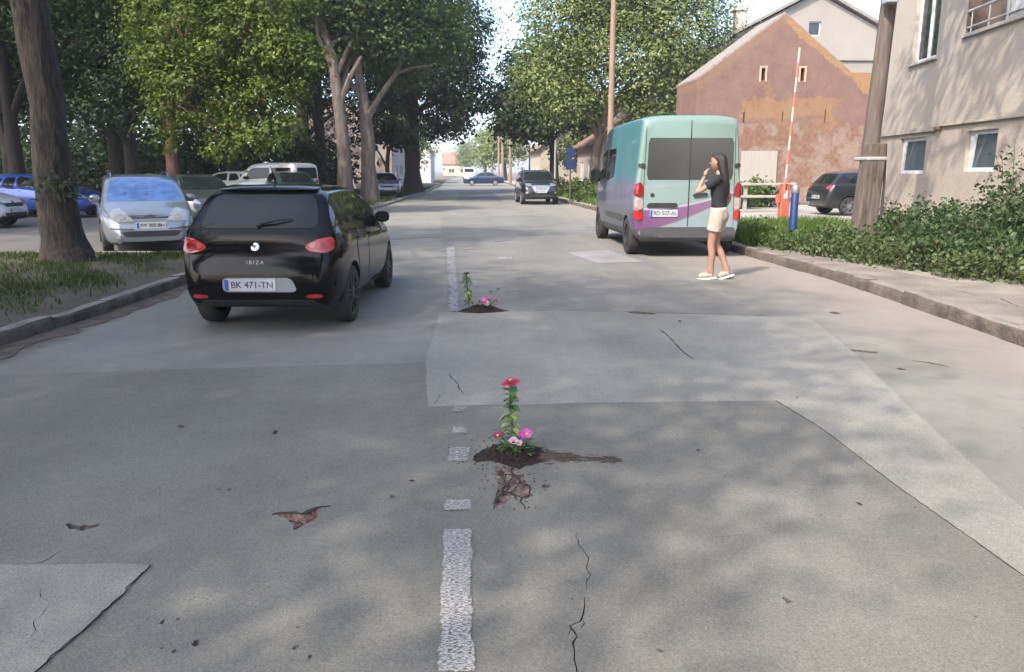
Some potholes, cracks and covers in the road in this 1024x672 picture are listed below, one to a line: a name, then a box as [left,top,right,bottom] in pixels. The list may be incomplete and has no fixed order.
pothole [457,304,508,313]
crack [569,534,591,672]
pothole [493,465,531,508]
crack [33,565,150,672]
pothole [65,523,100,531]
pothole [276,508,320,529]
pothole [473,443,544,470]
